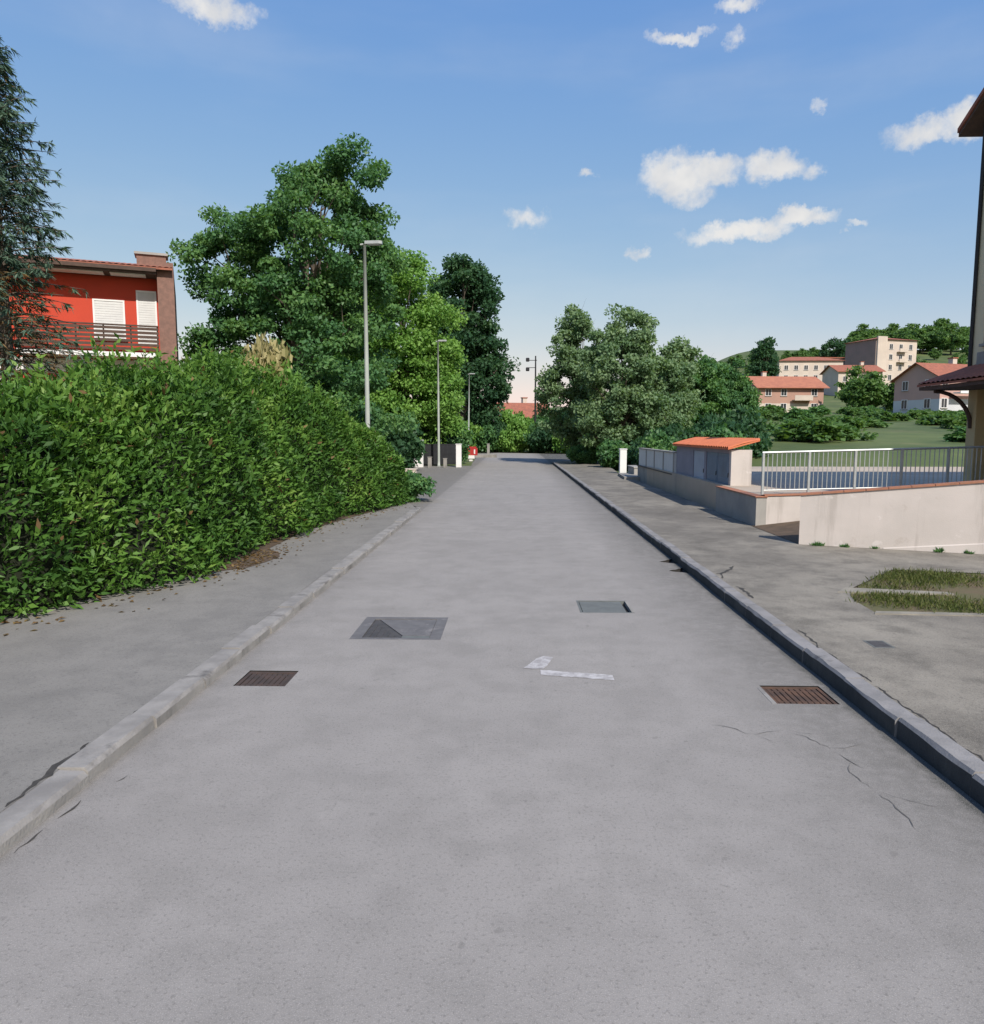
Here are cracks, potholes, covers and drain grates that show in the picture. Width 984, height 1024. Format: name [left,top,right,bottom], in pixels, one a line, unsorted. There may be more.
drain grate [234,671,298,686]
crack [720,725,930,830]
crack [798,630,984,762]
manhole cover [576,600,634,613]
crack [14,777,125,853]
drain grate [758,686,839,704]
utility cover [862,640,895,648]
manhole cover [349,617,448,640]
